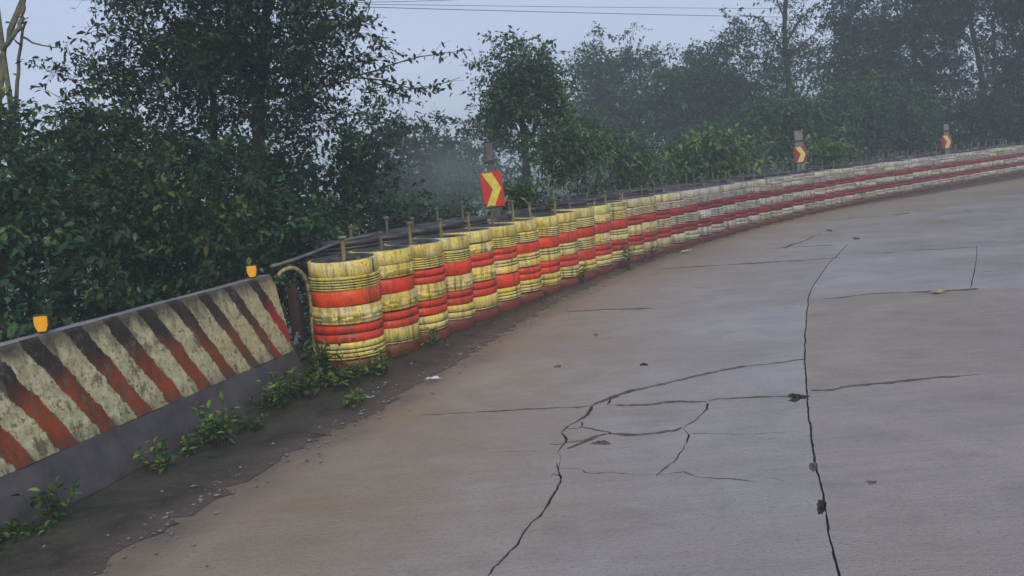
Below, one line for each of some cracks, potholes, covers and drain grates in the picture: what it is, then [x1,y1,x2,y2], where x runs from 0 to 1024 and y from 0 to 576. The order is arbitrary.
crack [429,213,978,576]
